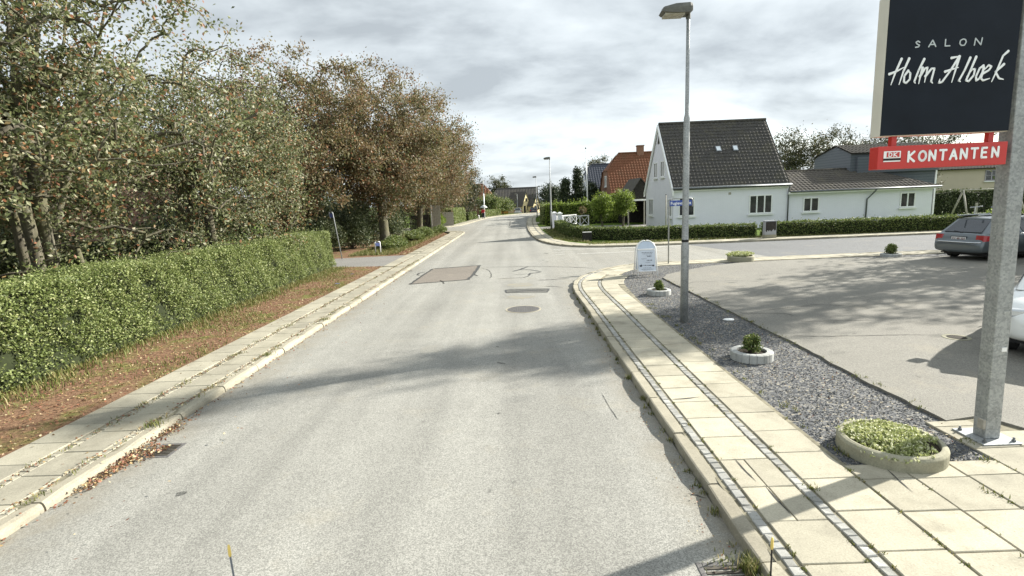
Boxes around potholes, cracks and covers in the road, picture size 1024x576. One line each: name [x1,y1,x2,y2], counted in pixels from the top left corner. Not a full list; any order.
drain grate [695,561,752,576]
manhole cover [506,305,541,313]
drain grate [143,443,187,458]
